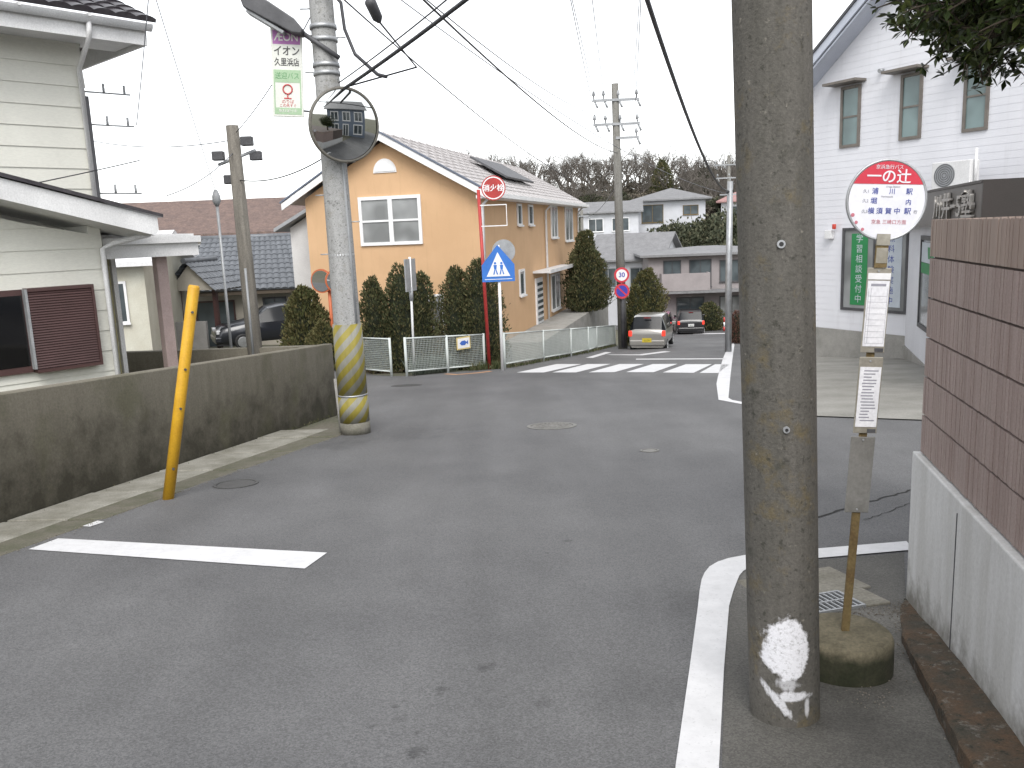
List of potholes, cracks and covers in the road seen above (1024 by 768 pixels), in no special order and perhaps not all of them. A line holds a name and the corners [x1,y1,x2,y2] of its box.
manhole cover [527,422,577,430]
crack [818,489,911,519]
manhole cover [213,479,259,489]
